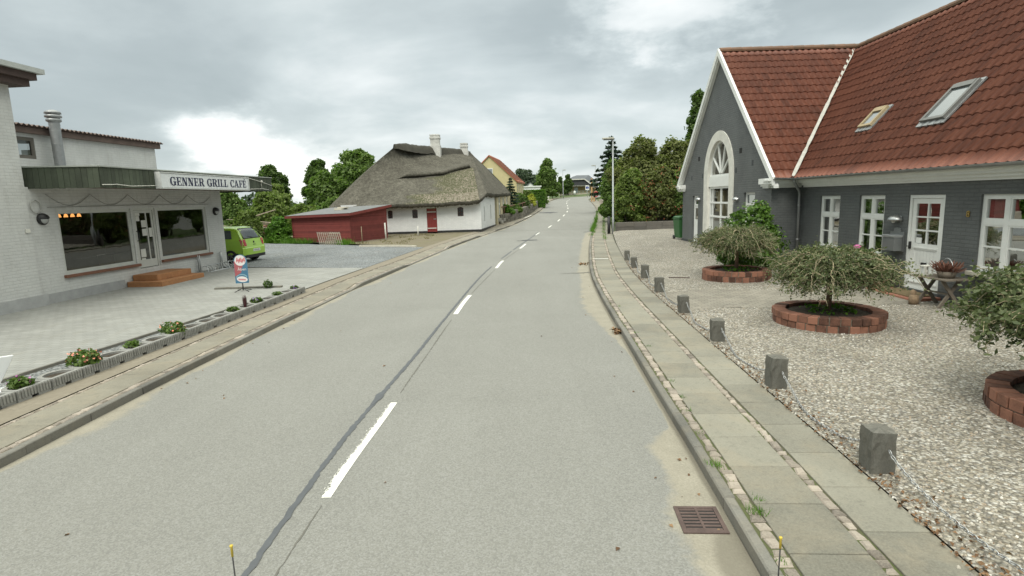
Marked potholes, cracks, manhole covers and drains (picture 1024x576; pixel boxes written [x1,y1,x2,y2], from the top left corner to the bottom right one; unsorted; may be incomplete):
crack [274,505,322,576]
drain grate [673,506,730,534]
crack [400,319,452,393]
